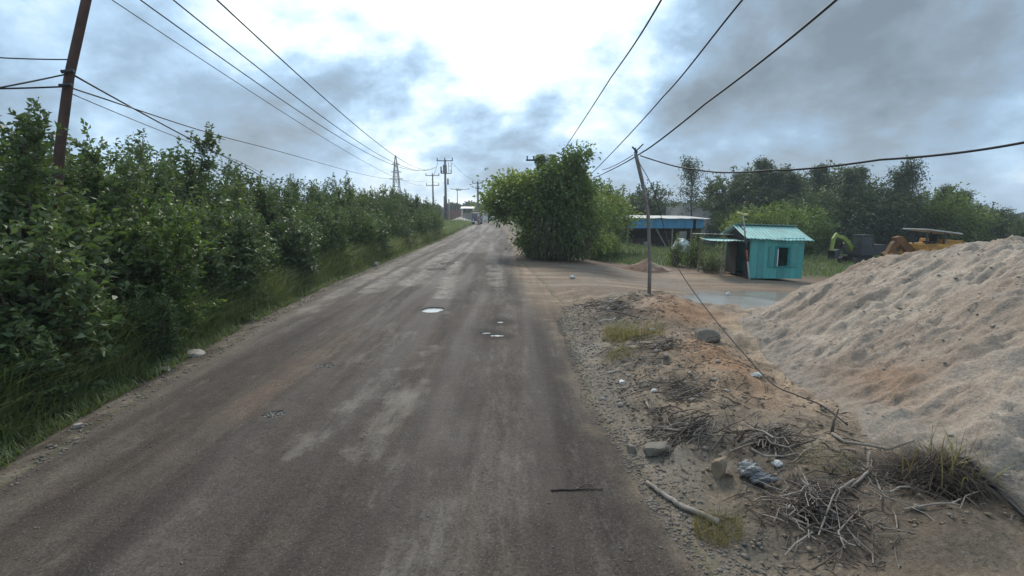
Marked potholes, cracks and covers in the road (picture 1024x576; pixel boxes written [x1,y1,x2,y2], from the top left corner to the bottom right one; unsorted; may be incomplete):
pothole [260,410,287,418]
